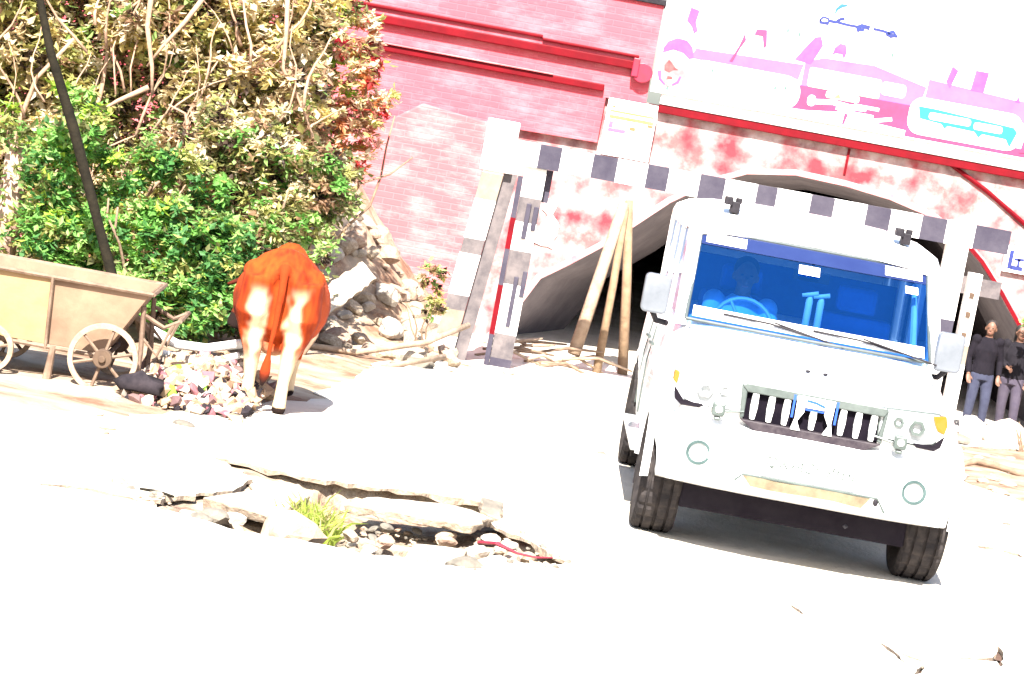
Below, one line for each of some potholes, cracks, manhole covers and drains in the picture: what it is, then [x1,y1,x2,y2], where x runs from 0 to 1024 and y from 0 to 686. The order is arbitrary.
pothole [155,463,562,564]
